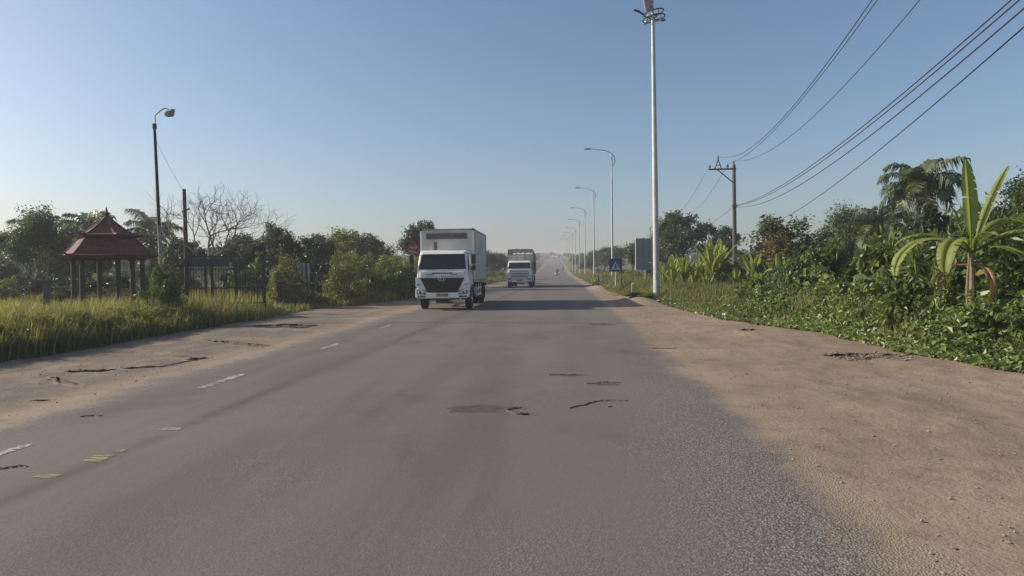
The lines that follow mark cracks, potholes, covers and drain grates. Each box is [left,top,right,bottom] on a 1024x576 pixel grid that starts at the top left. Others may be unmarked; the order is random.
crack [164,355,197,366]
pothole [442,404,528,414]
pothole [819,351,913,361]
crack [570,400,628,408]
pothole [47,376,85,387]
